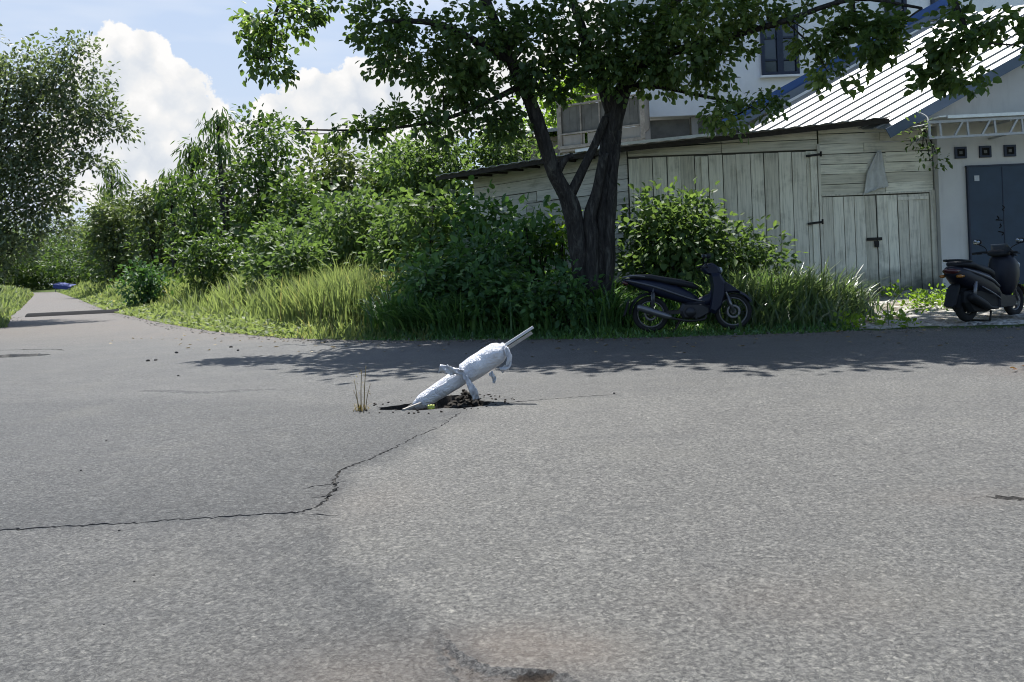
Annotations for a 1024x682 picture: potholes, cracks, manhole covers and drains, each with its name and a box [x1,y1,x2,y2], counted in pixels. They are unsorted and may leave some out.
crack [0,412,461,531]
pothole [365,389,515,414]
pothole [428,626,580,682]
